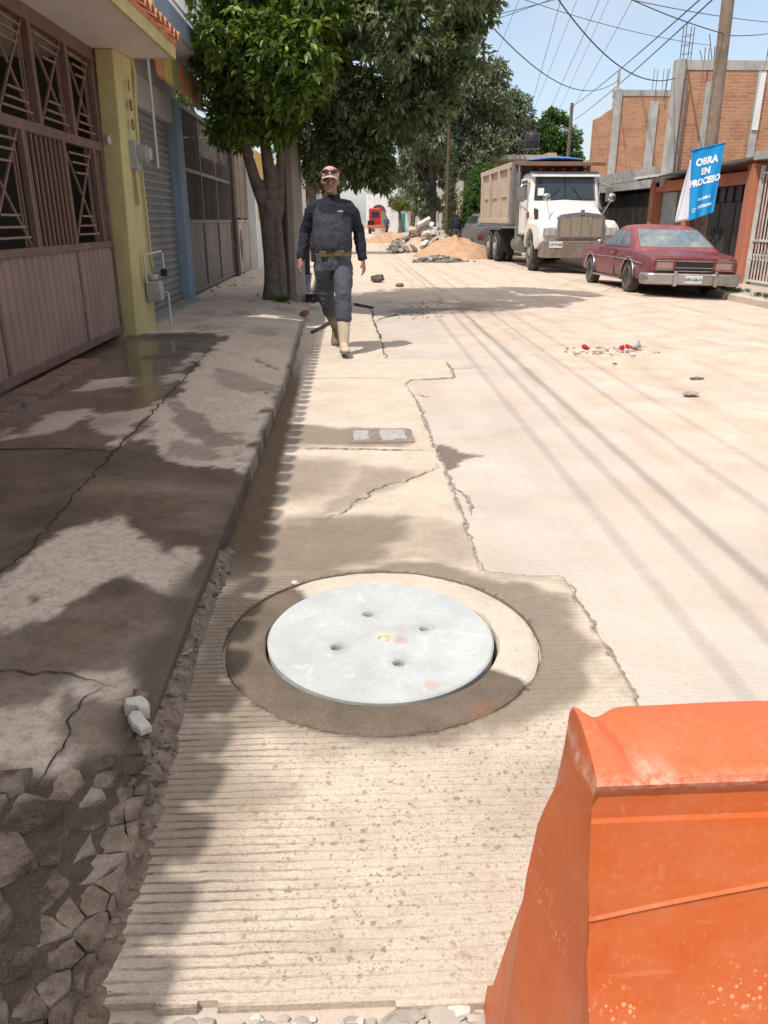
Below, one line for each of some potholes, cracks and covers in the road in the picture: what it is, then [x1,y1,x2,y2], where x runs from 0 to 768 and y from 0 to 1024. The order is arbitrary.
manhole cover [225,573,539,737]
crack [371,309,413,357]
manhole cover [349,428,415,444]
crack [313,361,483,570]
